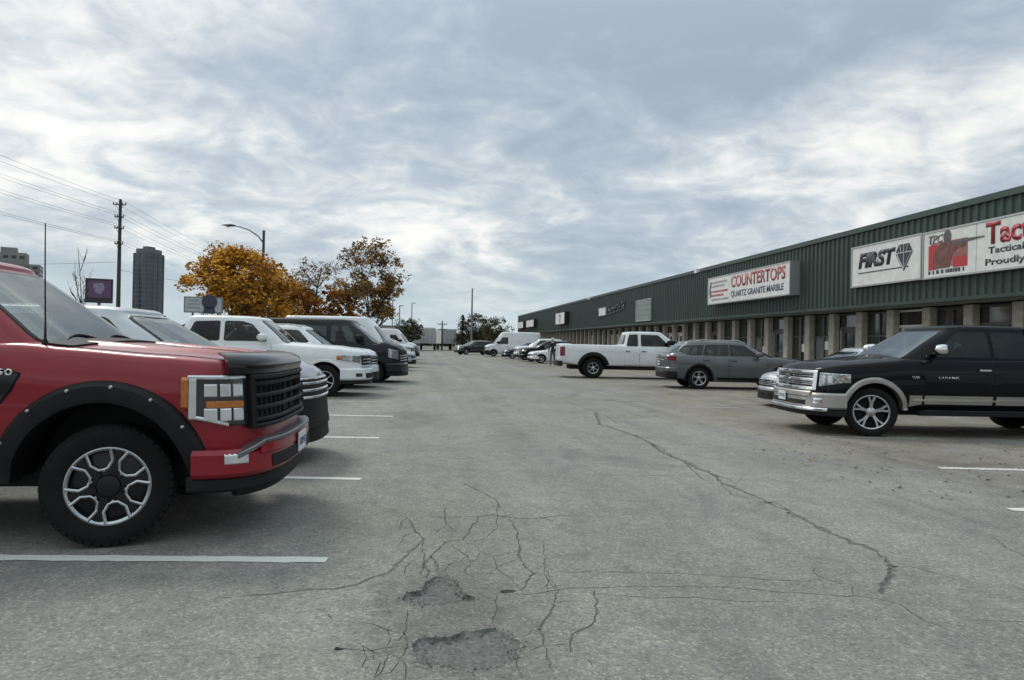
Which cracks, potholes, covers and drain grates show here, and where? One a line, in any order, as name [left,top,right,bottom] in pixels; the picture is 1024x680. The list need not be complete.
pothole [398,574,479,608]
pothole [406,625,526,676]
crack [221,396,955,679]
